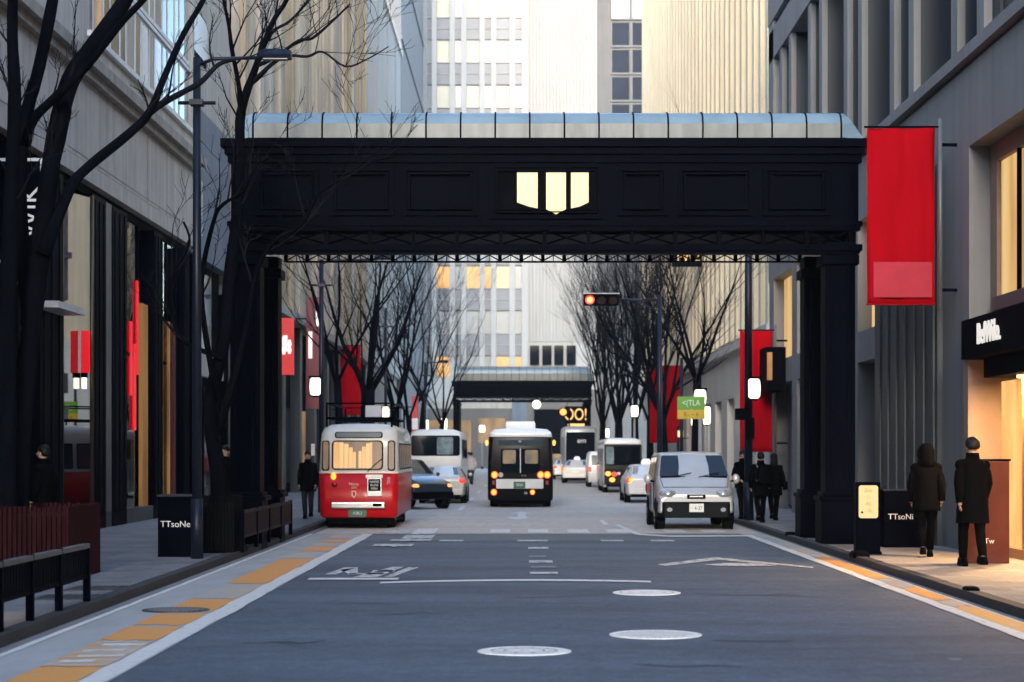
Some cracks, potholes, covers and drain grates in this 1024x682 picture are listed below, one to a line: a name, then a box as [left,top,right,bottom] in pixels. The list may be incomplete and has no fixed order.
manhole cover [609,630,702,639]
manhole cover [477,646,571,656]
